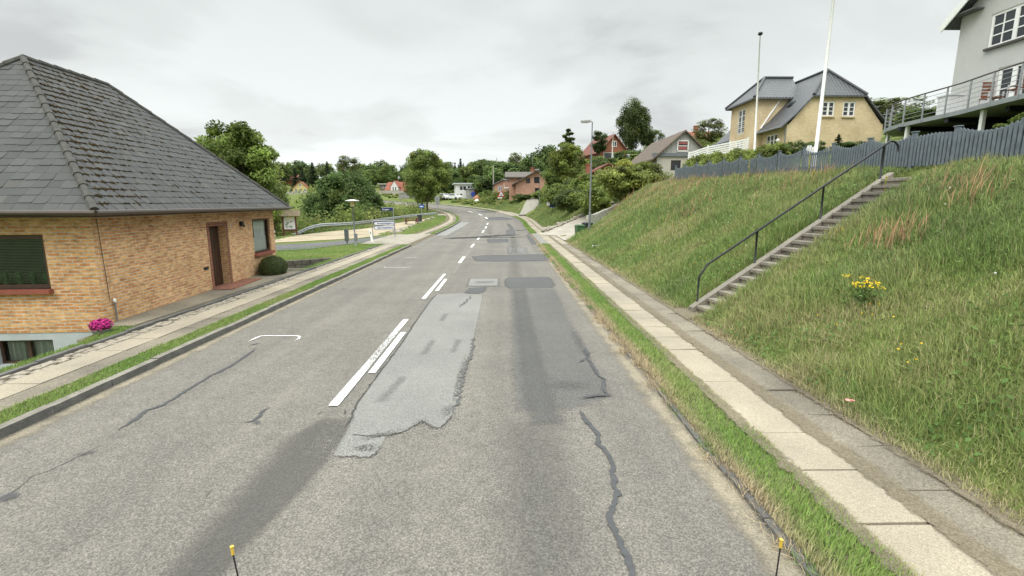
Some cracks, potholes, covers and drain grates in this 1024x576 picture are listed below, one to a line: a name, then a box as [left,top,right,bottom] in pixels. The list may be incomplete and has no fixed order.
crack [0,447,95,498]
